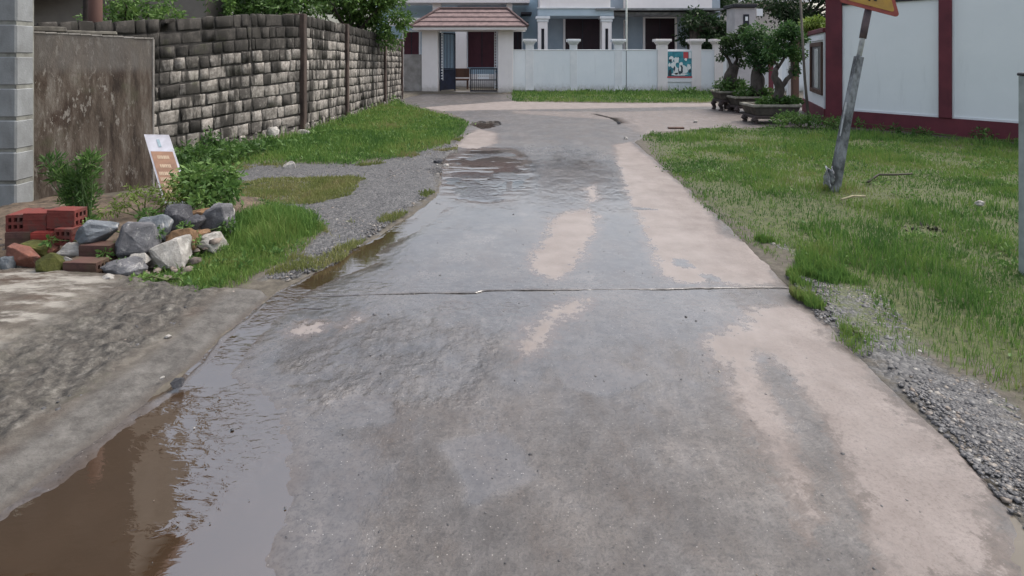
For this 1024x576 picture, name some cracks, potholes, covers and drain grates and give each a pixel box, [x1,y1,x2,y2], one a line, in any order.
pothole [472,121,500,129]
